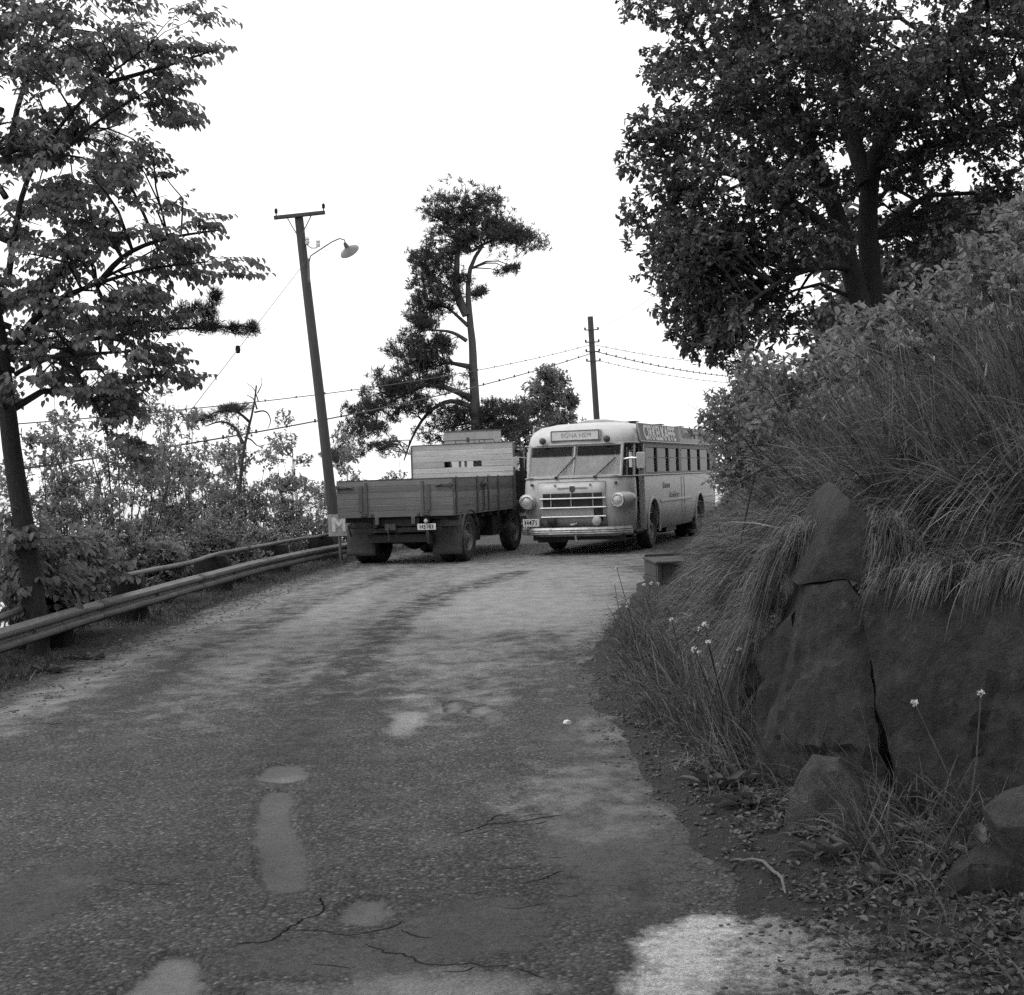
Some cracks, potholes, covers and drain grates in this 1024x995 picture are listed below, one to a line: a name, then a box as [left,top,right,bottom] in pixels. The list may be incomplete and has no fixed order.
crack [461,814,560,836]
crack [236,899,544,978]
